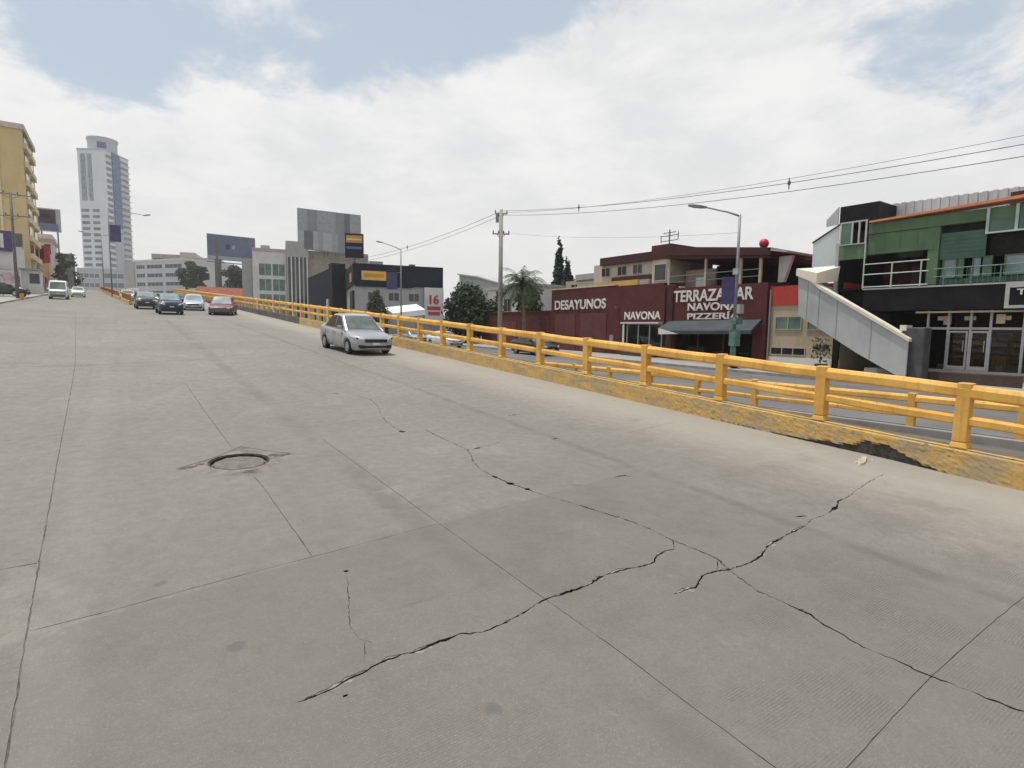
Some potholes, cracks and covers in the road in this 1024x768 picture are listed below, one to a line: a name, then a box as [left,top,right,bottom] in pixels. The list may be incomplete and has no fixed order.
manhole cover [177,446,293,477]
crack [297,430,1024,712]
